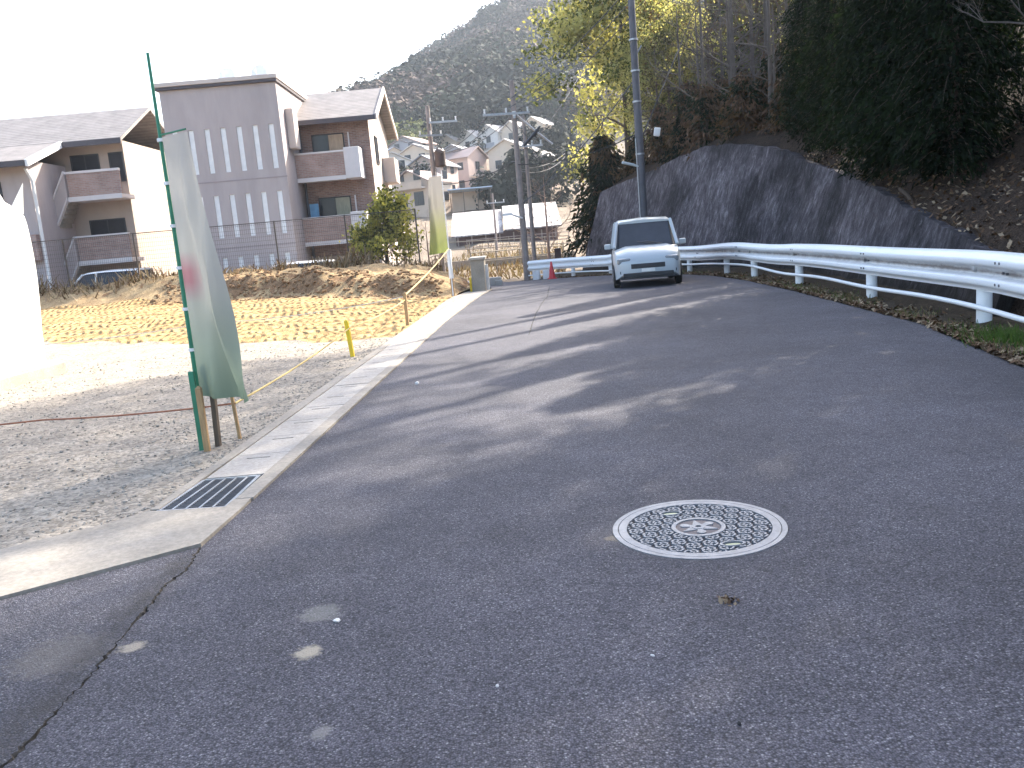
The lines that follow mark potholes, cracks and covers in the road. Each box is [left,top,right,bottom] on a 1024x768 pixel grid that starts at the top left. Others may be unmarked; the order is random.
crack [0,547,201,768]
drain grate [157,475,261,511]
manhole cover [613,500,788,560]
